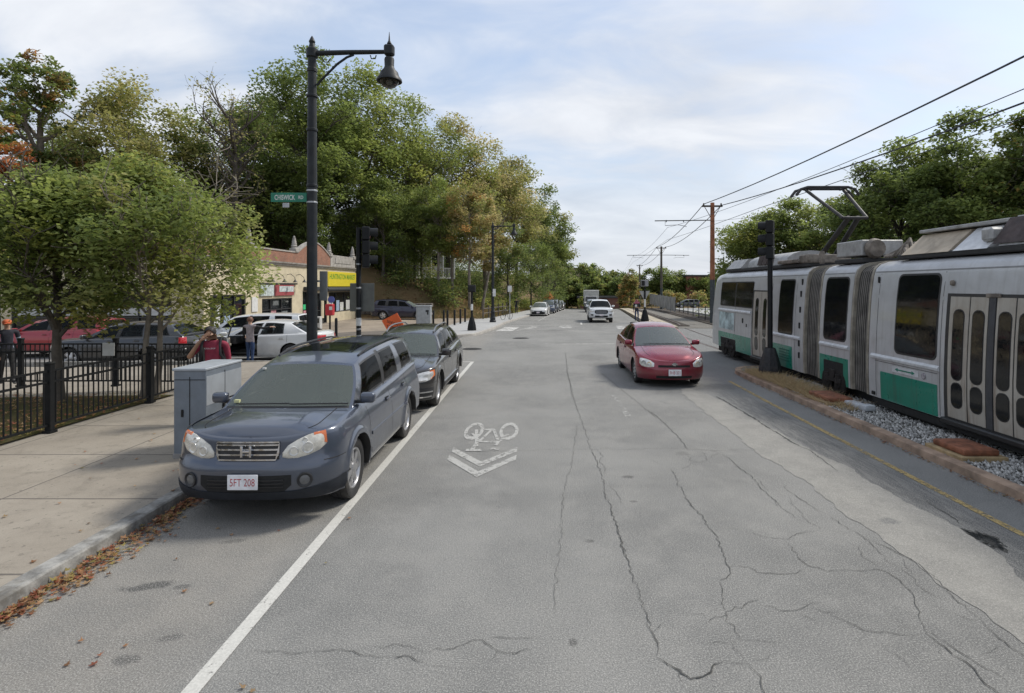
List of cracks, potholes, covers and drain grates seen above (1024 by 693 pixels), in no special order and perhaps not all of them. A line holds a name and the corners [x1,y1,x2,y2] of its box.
pothole [961,528,1008,553]
crack [430,372,1022,693]
crack [261,636,547,668]
